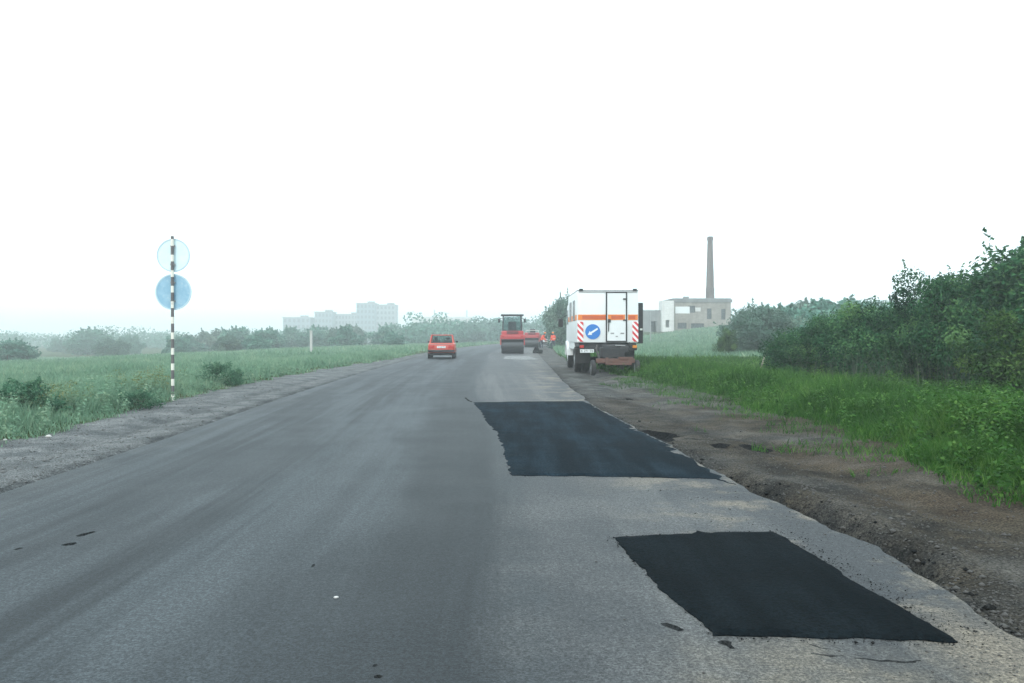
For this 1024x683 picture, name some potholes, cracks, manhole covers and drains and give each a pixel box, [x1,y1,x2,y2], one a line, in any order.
pothole [638,429,695,444]
